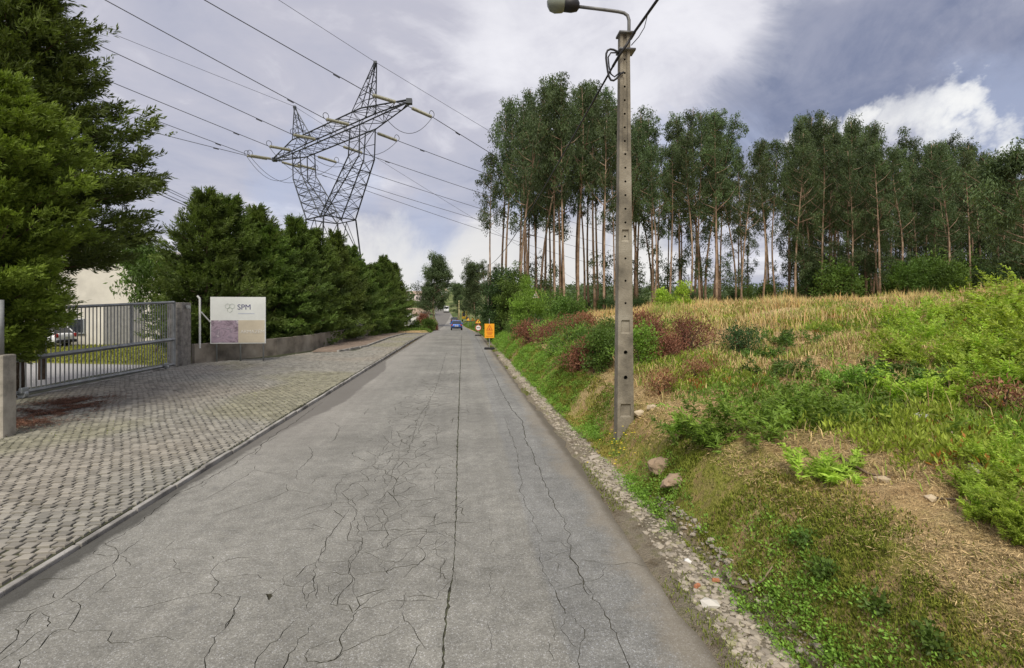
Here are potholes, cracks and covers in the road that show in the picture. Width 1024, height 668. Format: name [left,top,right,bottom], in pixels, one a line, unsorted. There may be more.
crack [0,537,183,668]
crack [482,350,646,668]
crack [254,359,471,668]
crack [204,598,240,668]
